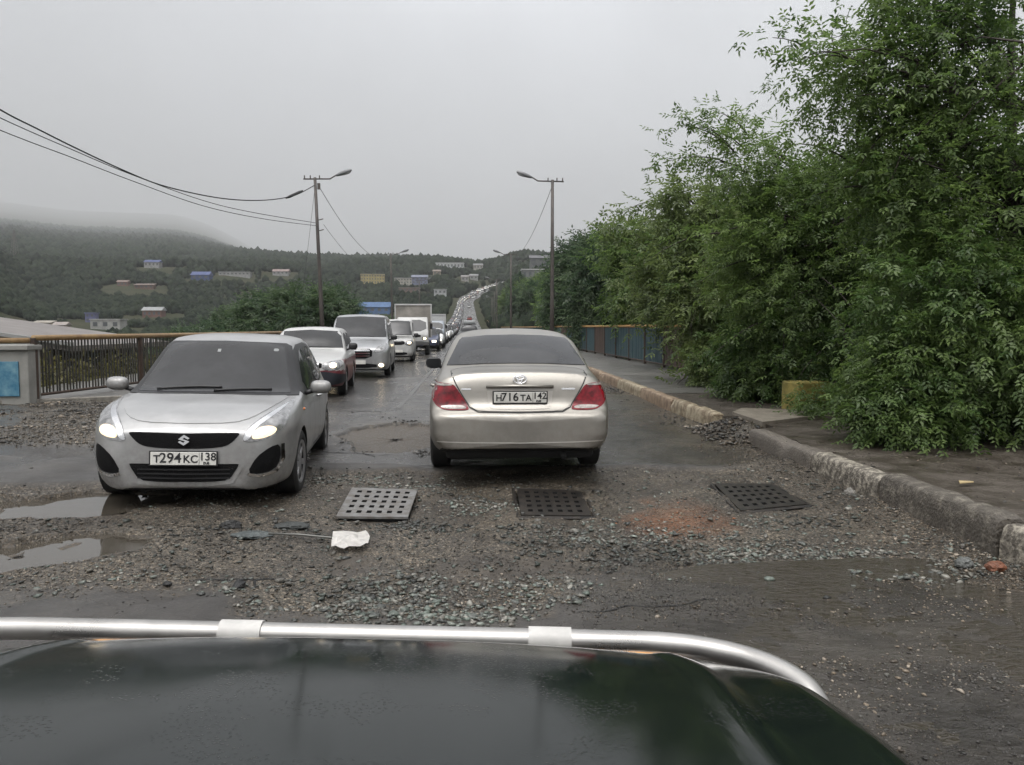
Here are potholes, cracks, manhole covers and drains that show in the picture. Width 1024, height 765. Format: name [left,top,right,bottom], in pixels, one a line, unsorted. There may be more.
pothole [333,422,430,453]
drain grate [710,483,813,514]
pothole [0,489,184,521]
pothole [0,527,174,575]
drain grate [512,488,596,520]
crack [580,599,704,612]
drain grate [336,487,418,523]
